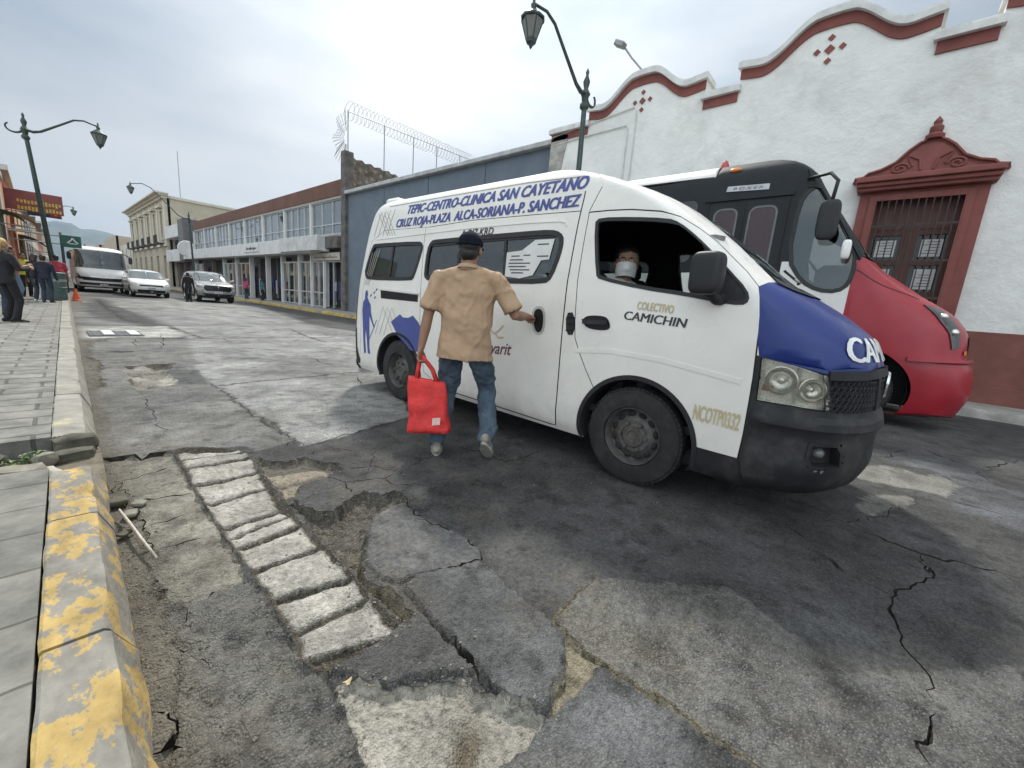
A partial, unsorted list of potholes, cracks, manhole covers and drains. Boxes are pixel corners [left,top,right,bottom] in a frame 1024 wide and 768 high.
pothole [173,447,399,677]
crack [785,503,1019,767]
crack [103,394,205,557]
crack [281,441,541,691]
pothole [122,363,178,391]
crack [146,578,236,759]
crack [885,445,1024,521]
